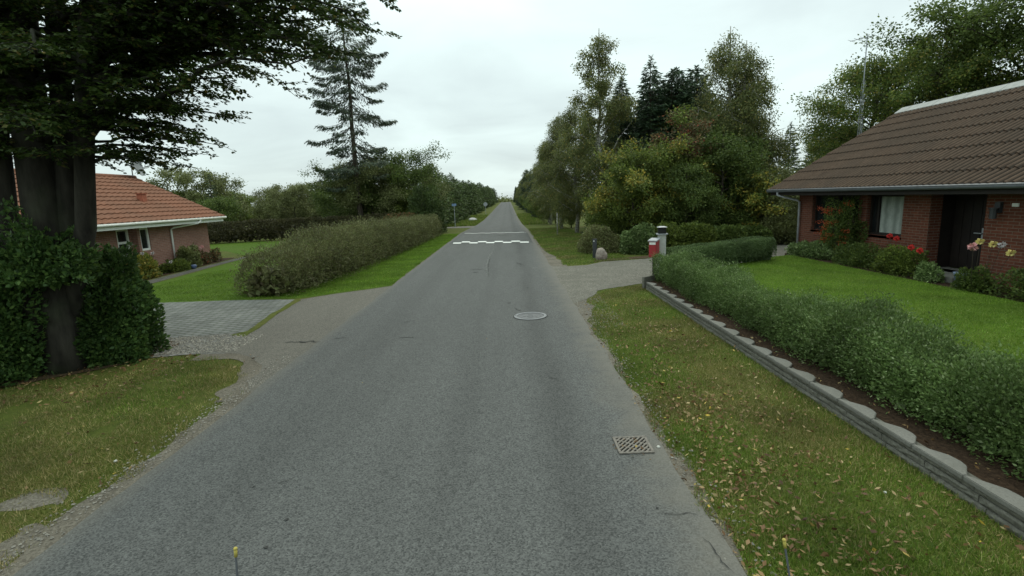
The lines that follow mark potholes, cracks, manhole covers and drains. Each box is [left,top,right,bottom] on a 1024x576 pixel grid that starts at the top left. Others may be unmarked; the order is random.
drain grate [612,436,655,454]
manhole cover [513,312,548,320]
